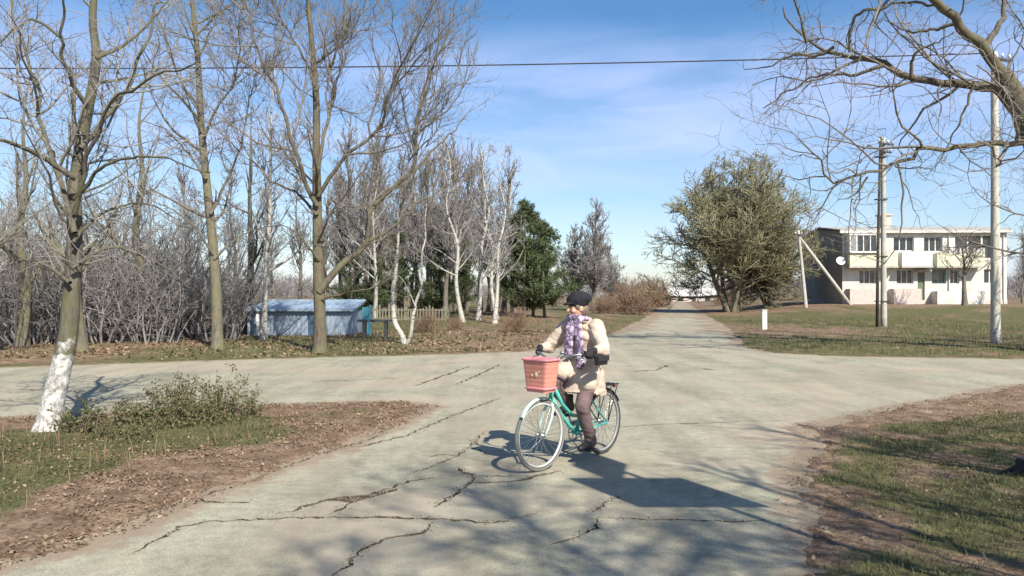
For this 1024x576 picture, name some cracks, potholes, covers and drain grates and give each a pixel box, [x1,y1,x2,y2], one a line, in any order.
crack [416,365,499,386]
crack [67,398,558,576]
crack [550,497,761,545]
